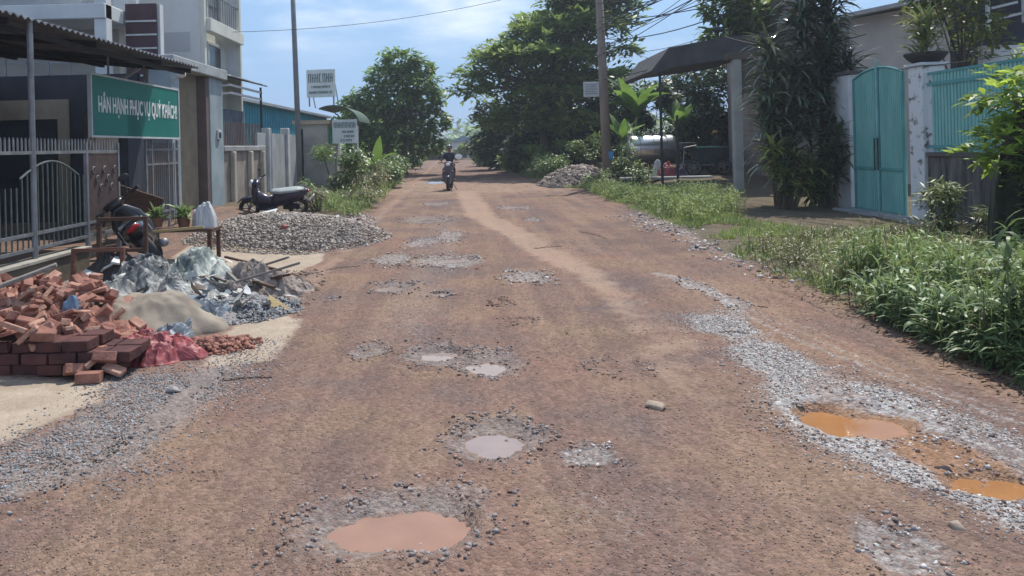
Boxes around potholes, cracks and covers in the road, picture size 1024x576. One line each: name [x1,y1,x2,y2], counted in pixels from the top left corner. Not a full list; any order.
pothole [494,268,567,286]
pothole [435,229,469,245]
pothole [247,471,533,576]
pothole [898,454,1024,509]
pothole [418,405,576,474]
pothole [364,251,414,269]
pothole [394,251,500,272]
pothole [439,341,539,383]
pothole [363,278,426,296]
pothole [394,337,493,373]
pothole [341,339,396,363]
pothole [399,235,453,249]
